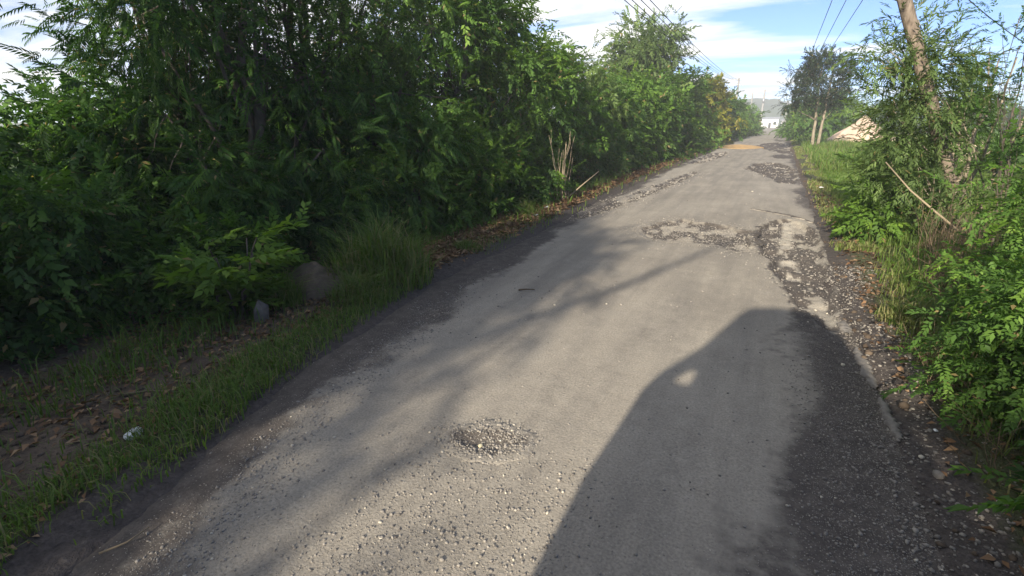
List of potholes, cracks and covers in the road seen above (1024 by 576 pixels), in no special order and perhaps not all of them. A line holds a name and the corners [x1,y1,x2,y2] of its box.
crack [750,209,814,223]
pothole [745,218,847,335]
pothole [633,218,766,253]
pothole [570,171,699,220]
pothole [739,162,800,185]
pothole [437,419,539,465]
